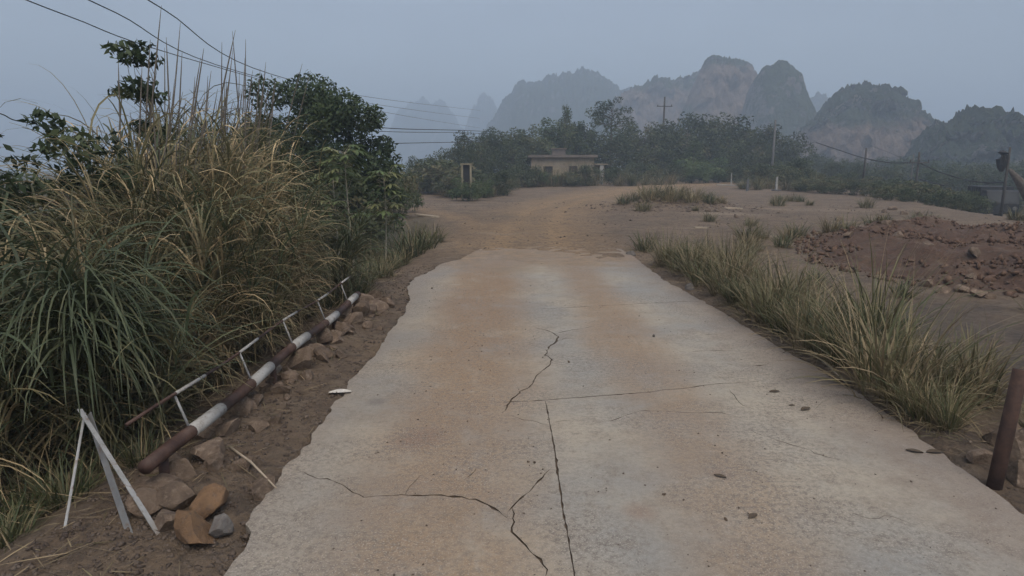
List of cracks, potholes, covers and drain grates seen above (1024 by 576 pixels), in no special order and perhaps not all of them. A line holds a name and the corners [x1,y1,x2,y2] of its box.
crack [304,329,575,576]
